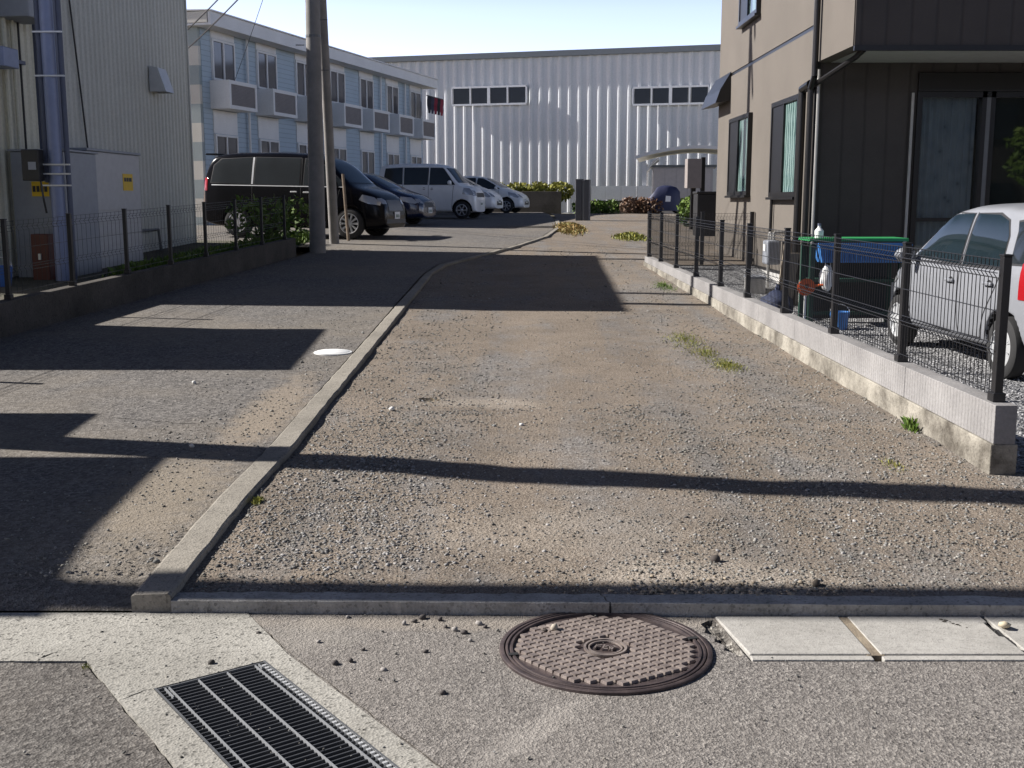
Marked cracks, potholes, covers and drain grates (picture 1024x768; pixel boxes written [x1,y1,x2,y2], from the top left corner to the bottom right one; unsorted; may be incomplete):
drain grate [154,660,400,768]
utility cover [314,349,352,357]
manhole cover [499,612,713,696]
